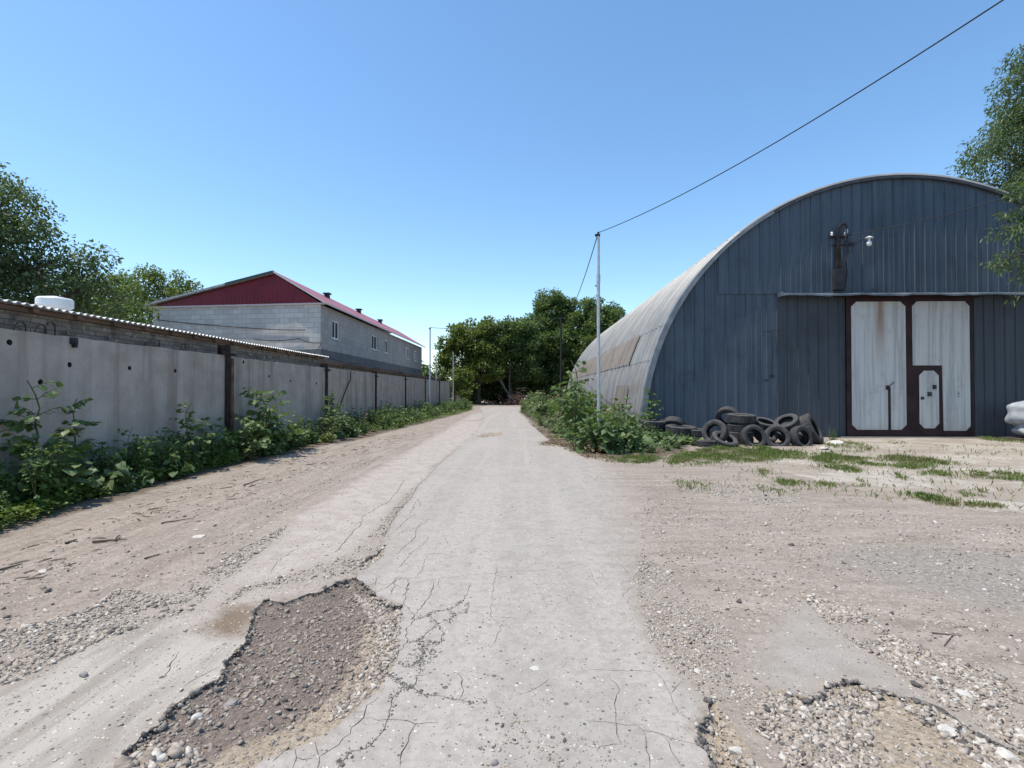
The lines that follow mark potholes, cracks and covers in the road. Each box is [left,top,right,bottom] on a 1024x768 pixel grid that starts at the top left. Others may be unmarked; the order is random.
pothole [126,578,403,768]
crack [583,669,695,768]
crack [272,481,597,768]
pothole [699,702,750,768]
pothole [761,683,1024,768]
